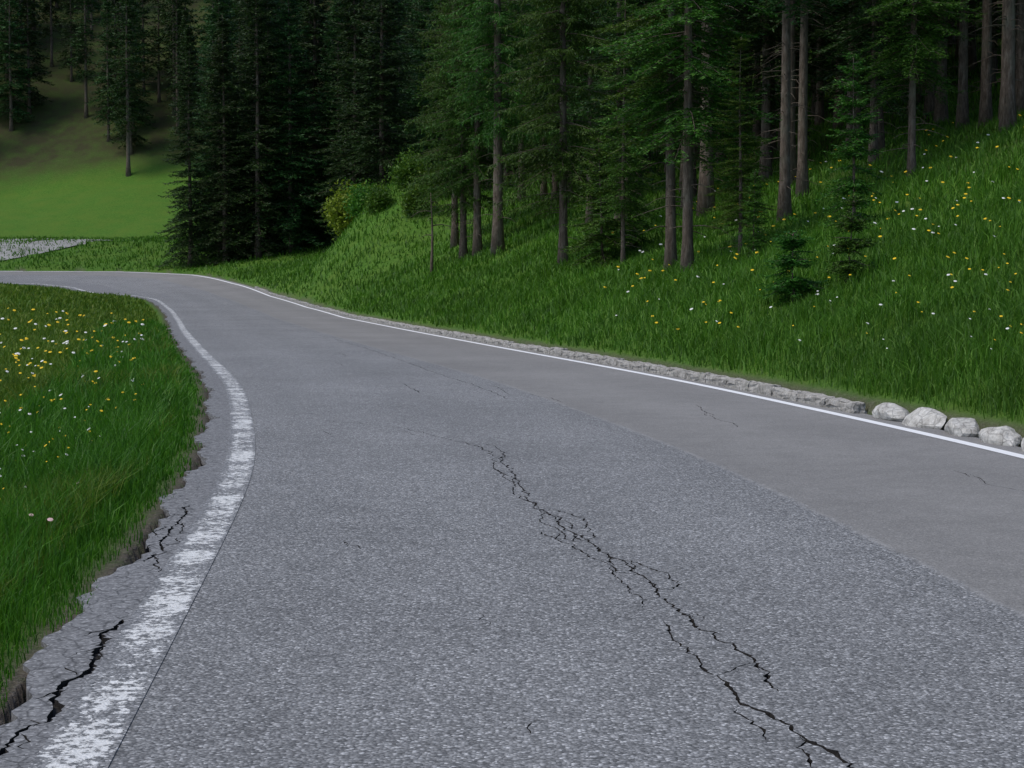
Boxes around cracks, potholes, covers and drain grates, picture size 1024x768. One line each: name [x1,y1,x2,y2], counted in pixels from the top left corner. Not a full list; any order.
crack [332,339,509,398]
crack [144,506,190,572]
crack [0,619,124,756]
crack [333,421,854,768]
